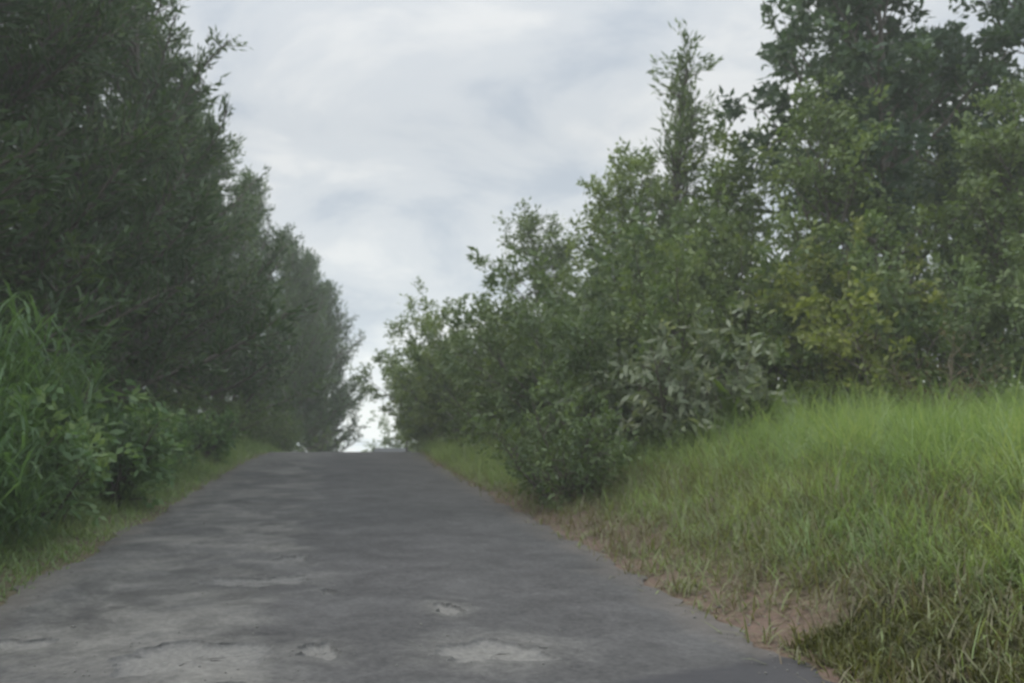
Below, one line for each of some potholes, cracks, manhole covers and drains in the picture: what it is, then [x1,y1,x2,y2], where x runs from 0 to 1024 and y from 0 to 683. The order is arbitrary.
pothole [295,640,342,661]
pothole [432,602,466,615]
pothole [433,637,562,663]
pothole [107,640,276,678]
